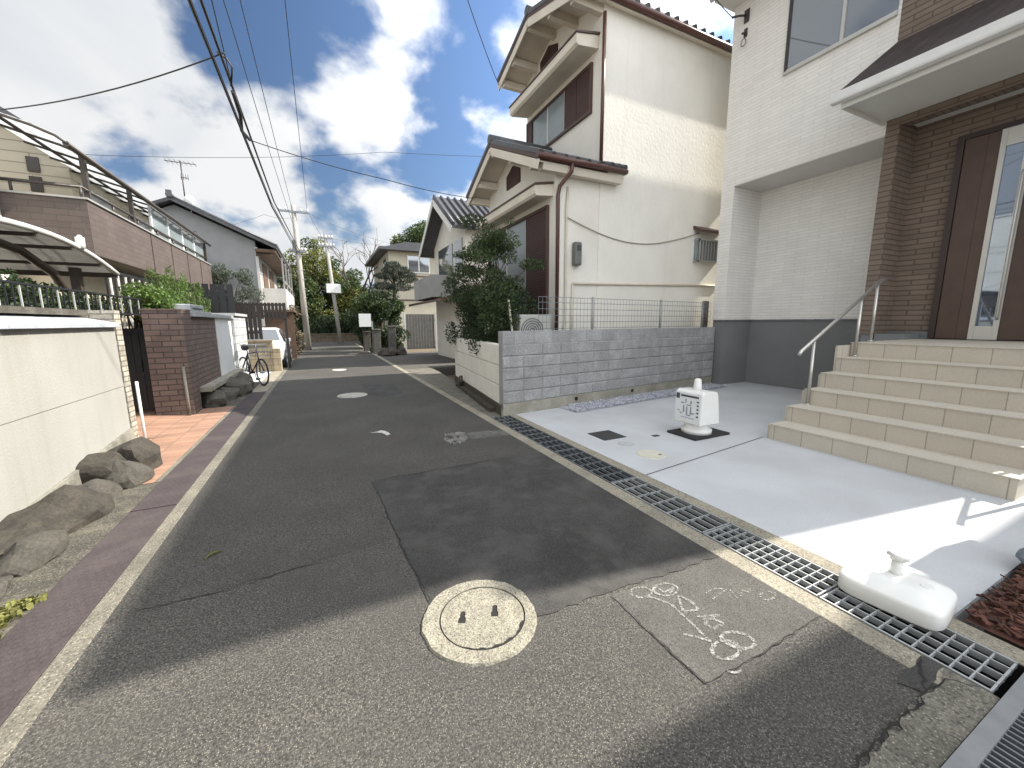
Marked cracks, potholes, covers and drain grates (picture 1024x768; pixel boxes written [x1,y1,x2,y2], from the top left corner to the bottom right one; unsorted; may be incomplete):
crack [853,656,975,768]
drain grate [819,587,1019,694]
utility cover [587,430,626,441]
utility cover [636,450,666,459]
drain grate [611,477,731,534]
drain grate [703,524,839,598]
crack [130,562,320,613]
manhole cover [421,580,537,667]
drain grate [518,429,576,452]
drain grate [554,448,635,484]
drain grate [492,415,537,432]
